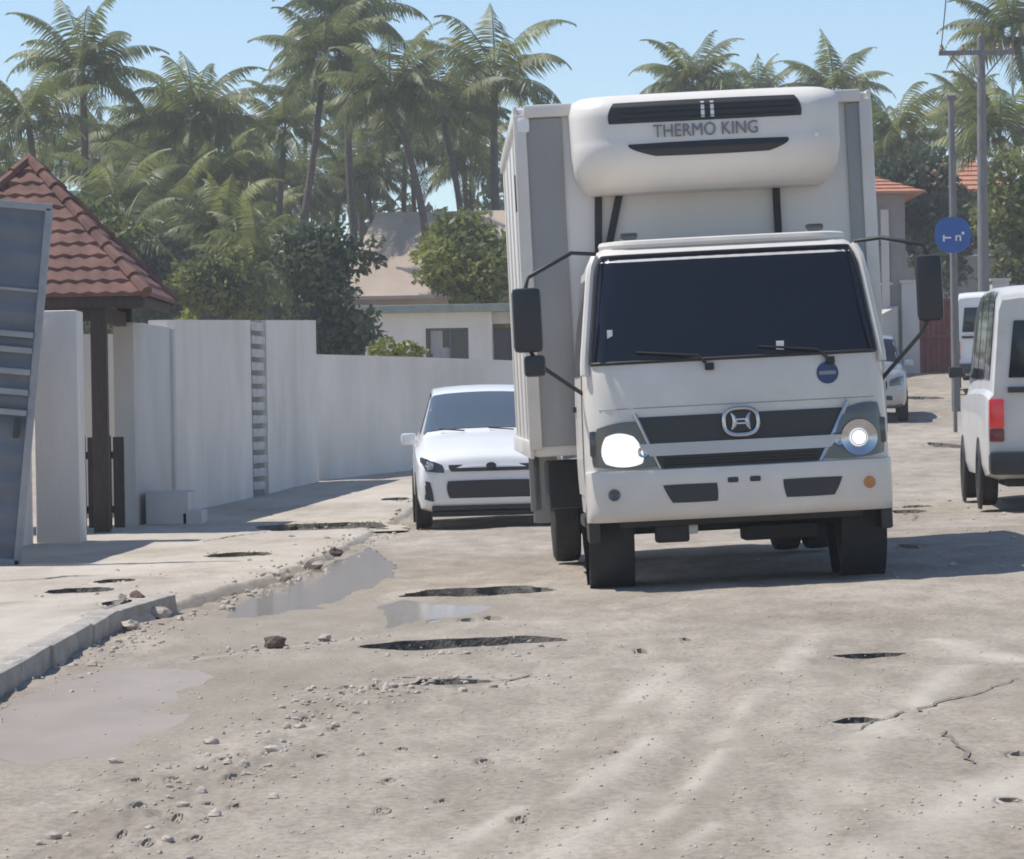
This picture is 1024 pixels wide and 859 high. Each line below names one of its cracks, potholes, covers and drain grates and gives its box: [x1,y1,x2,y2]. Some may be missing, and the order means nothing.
pothole [379,585,573,599]
pothole [827,716,886,726]
pothole [240,522,409,533]
crack [848,677,1017,763]
pothole [397,678,504,688]
pothole [824,652,915,662]
pothole [327,635,593,653]
pothole [35,587,123,595]
